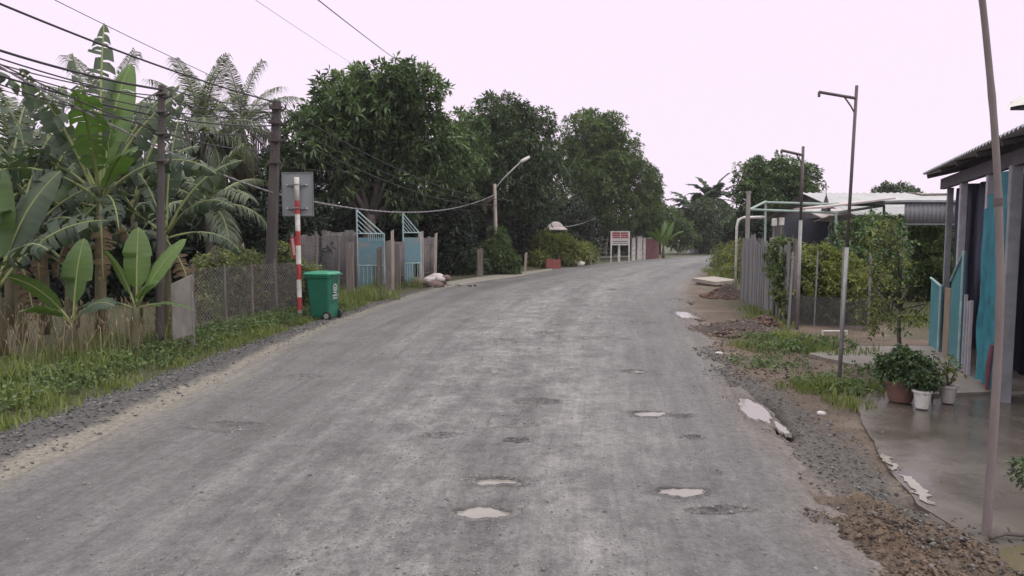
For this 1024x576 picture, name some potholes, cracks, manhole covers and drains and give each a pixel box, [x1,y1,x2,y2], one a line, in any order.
pothole [624,410,671,418]
pothole [646,486,713,499]
pothole [729,395,780,429]
pothole [506,397,564,405]
pothole [460,474,539,487]
pothole [682,503,758,514]
pothole [672,310,701,319]
pothole [769,418,794,438]
pothole [440,505,523,522]
